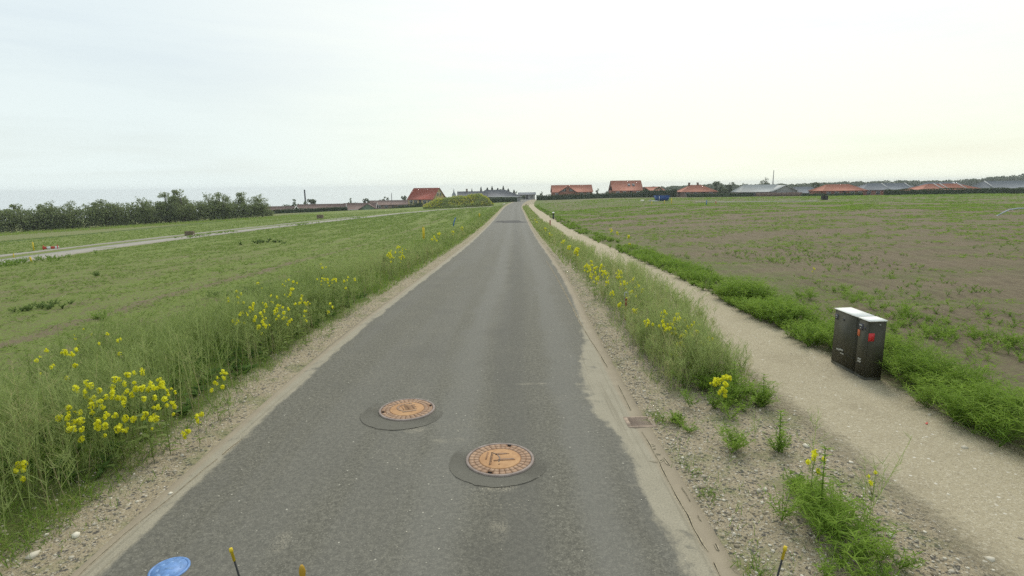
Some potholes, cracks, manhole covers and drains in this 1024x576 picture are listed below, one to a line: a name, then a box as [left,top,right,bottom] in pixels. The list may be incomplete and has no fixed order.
manhole cover [466,443,534,477]
drain grate [623,416,657,428]
manhole cover [379,398,435,421]
